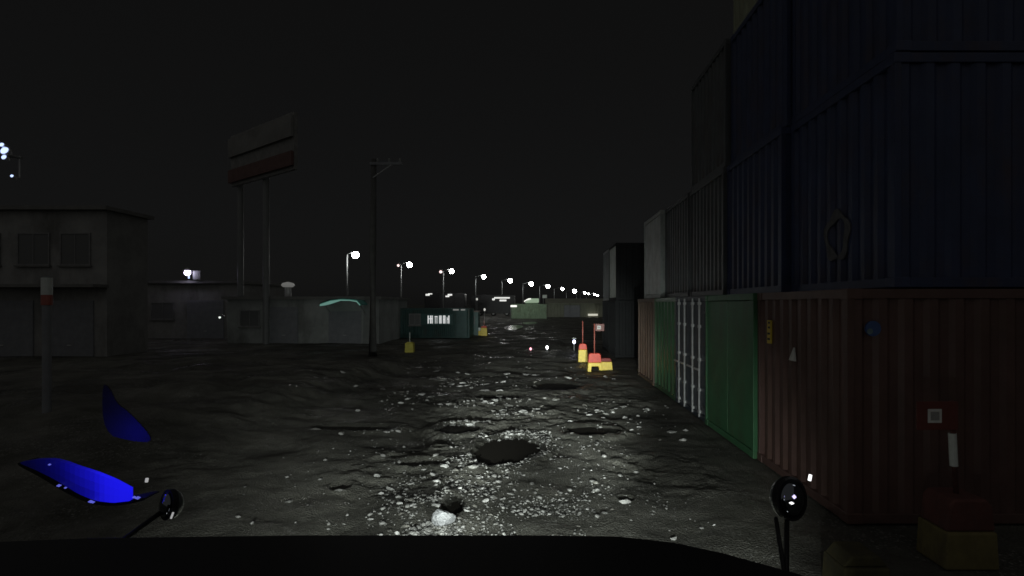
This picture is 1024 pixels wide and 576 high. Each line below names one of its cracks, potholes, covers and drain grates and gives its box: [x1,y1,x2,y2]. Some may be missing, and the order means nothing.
pothole [522,380,594,391]
pothole [466,431,548,467]
pothole [441,496,467,515]
pothole [327,479,356,490]
pothole [557,424,624,436]
pothole [430,420,487,434]
